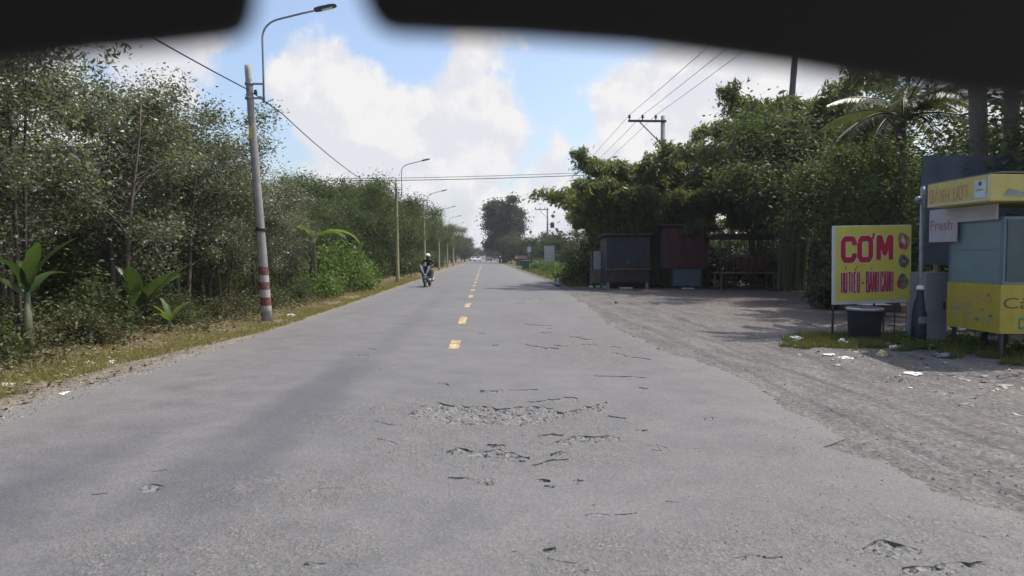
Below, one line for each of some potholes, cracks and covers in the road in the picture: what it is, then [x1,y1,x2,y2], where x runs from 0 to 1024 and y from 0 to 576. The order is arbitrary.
pothole [446,447,530,462]
crack [524,324,650,389]
crack [532,458,569,466]
pothole [861,539,922,560]
pothole [139,484,165,493]
pothole [552,435,620,447]
pothole [902,561,988,576]
pothole [408,402,564,427]
